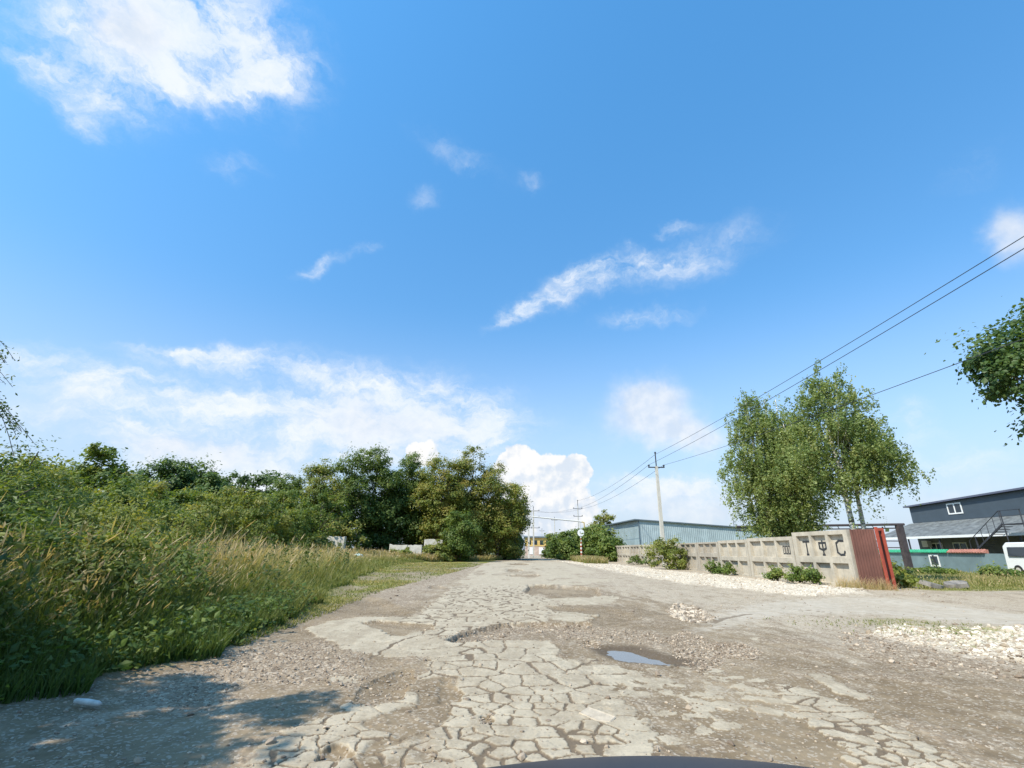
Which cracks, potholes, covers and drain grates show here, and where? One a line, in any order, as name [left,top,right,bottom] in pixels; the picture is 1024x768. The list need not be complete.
crack [369,615,451,659]
pothole [445,621,592,643]
pothole [349,669,417,705]
pothole [359,619,435,636]
crack [247,641,646,768]
pothole [523,584,602,598]
pothole [591,643,696,670]
